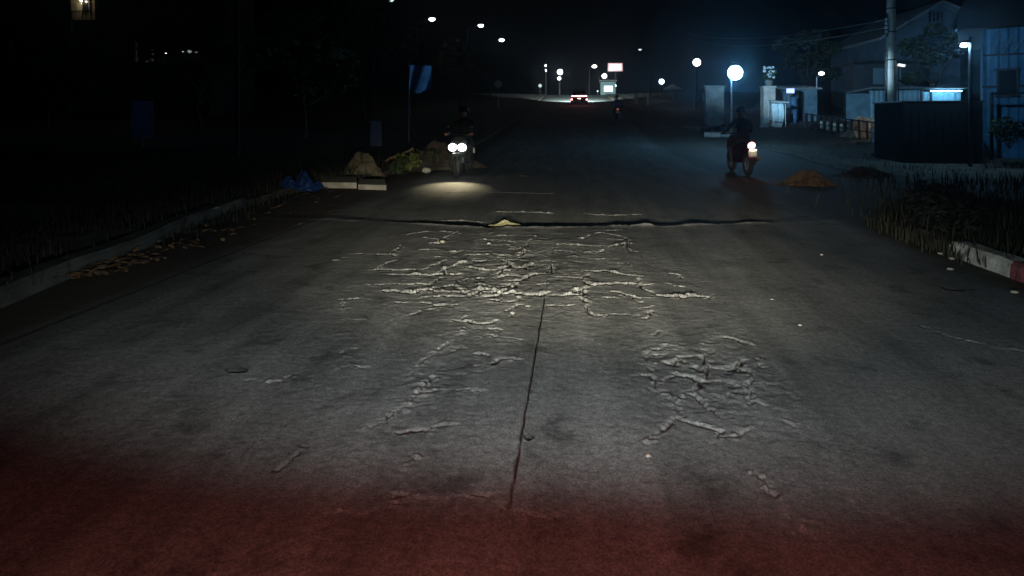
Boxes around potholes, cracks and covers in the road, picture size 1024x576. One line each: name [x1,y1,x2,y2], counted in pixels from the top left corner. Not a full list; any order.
crack [330,211,800,473]
crack [916,325,1024,353]
crack [747,469,827,543]
crack [243,373,298,384]
